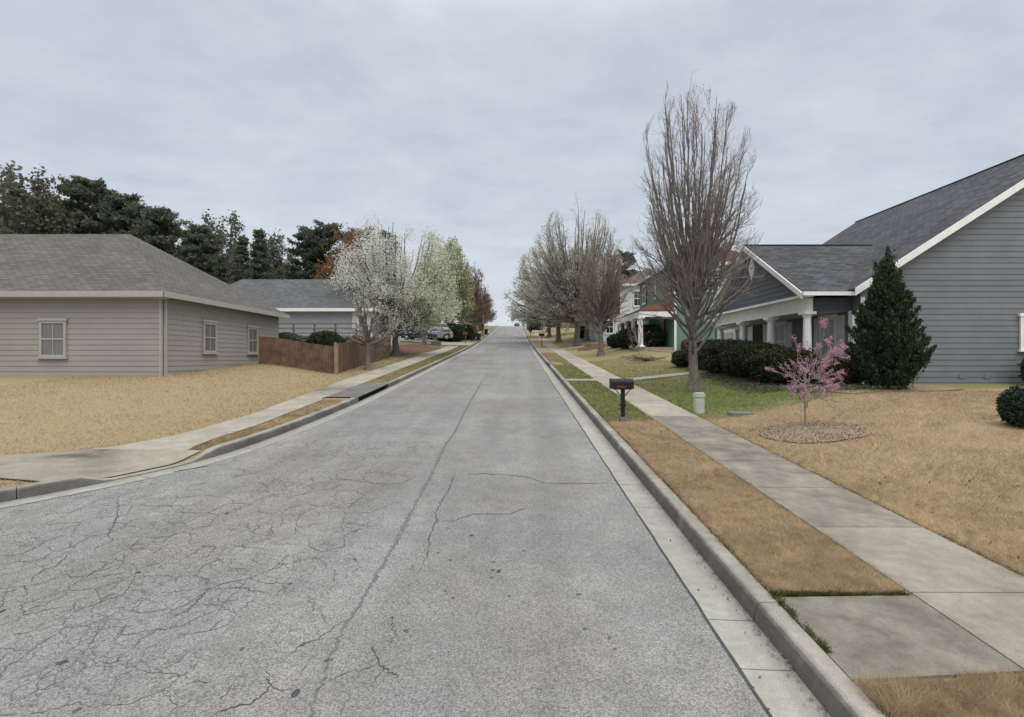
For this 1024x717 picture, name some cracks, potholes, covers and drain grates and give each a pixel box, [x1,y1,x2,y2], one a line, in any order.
crack [0,410,441,717]
crack [418,328,773,717]
drain grate [326,383,390,402]
